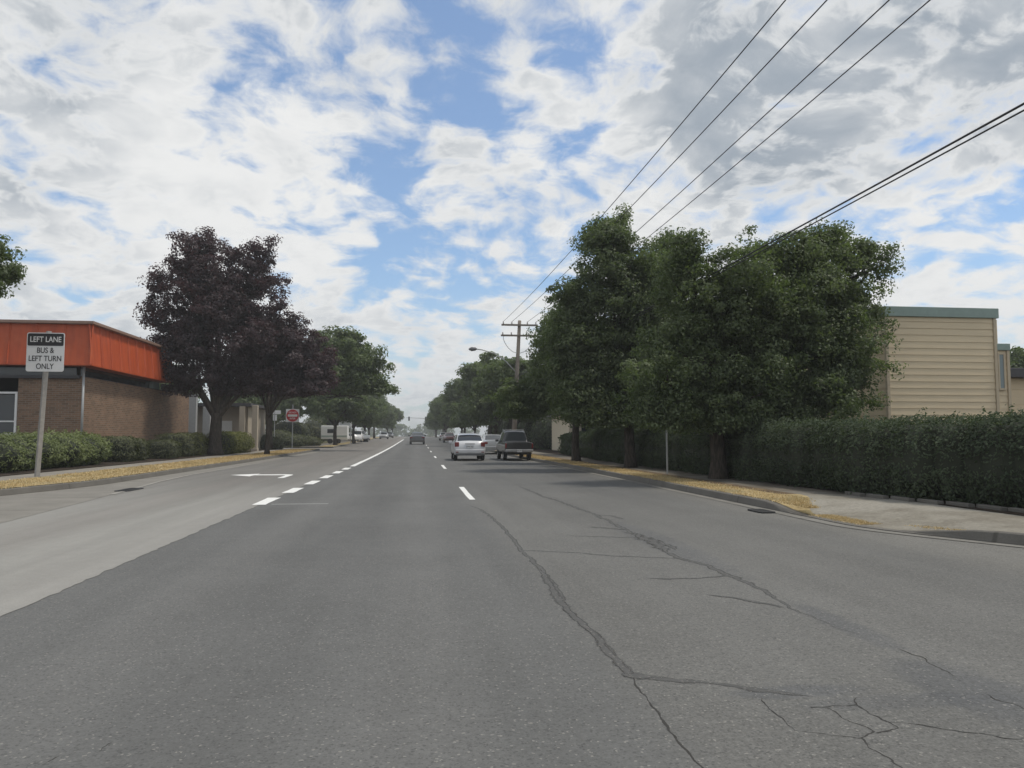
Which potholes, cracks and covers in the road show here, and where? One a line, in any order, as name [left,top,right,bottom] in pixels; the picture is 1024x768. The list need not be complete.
crack [761,698,1024,768]
crack [898,648,1024,709]
crack [633,678,704,768]
